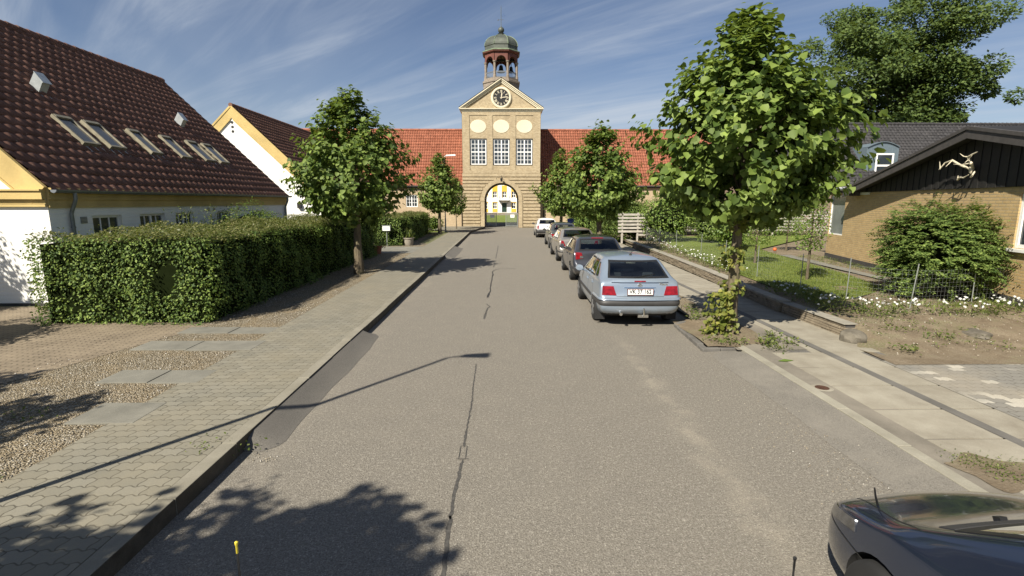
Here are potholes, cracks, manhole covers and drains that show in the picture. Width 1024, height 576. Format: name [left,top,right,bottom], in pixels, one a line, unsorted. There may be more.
manhole cover [811,384,834,392]
crack [483,248,498,319]
